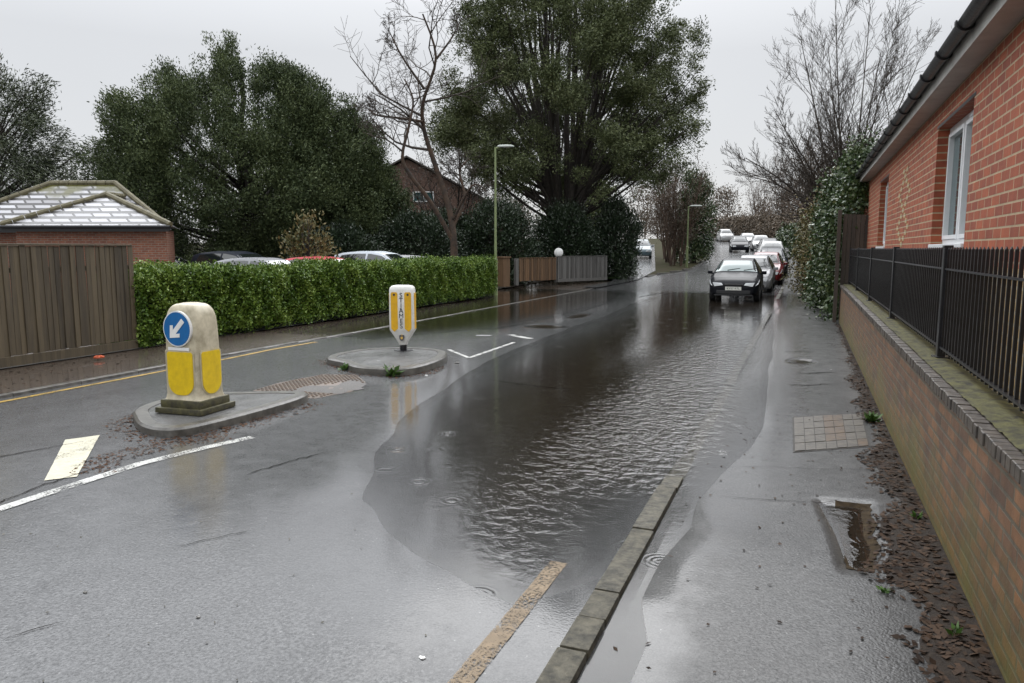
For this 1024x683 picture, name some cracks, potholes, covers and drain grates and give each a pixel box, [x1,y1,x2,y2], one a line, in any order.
pothole [835,500,881,571]
